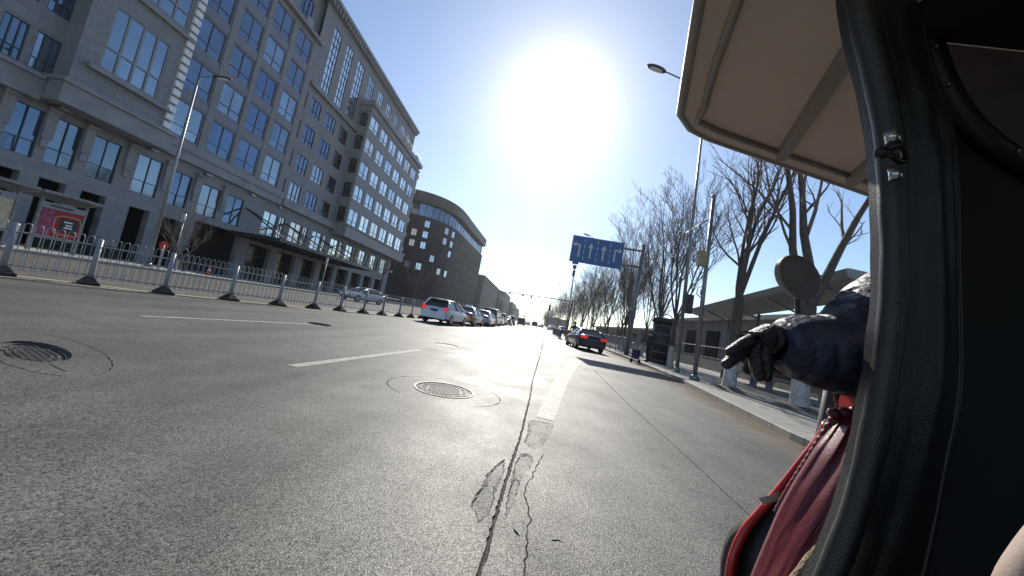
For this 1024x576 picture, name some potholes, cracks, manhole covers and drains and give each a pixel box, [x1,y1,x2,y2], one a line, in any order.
manhole cover [0,341,72,364]
manhole cover [414,381,474,399]
pothole [471,459,505,524]
crack [386,340,562,576]
pothole [504,453,535,518]
